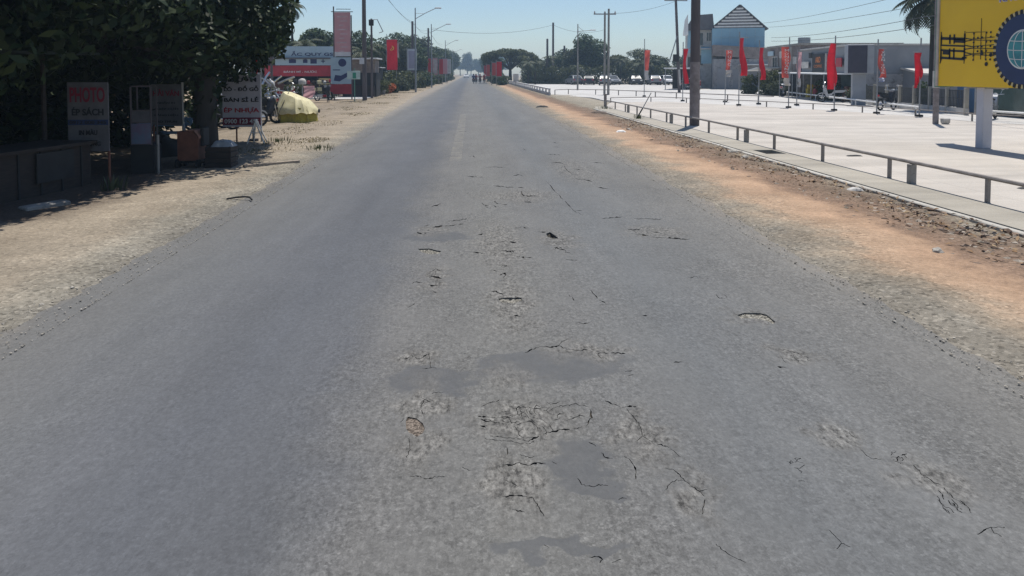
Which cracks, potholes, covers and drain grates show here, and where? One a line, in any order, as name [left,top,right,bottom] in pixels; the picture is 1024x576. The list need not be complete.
crack [546,142,606,214]
pothole [738,313,775,324]
crack [846,431,971,513]
crack [602,216,687,240]
crack [417,204,574,294]
pothole [406,417,425,437]
crack [478,400,707,516]
